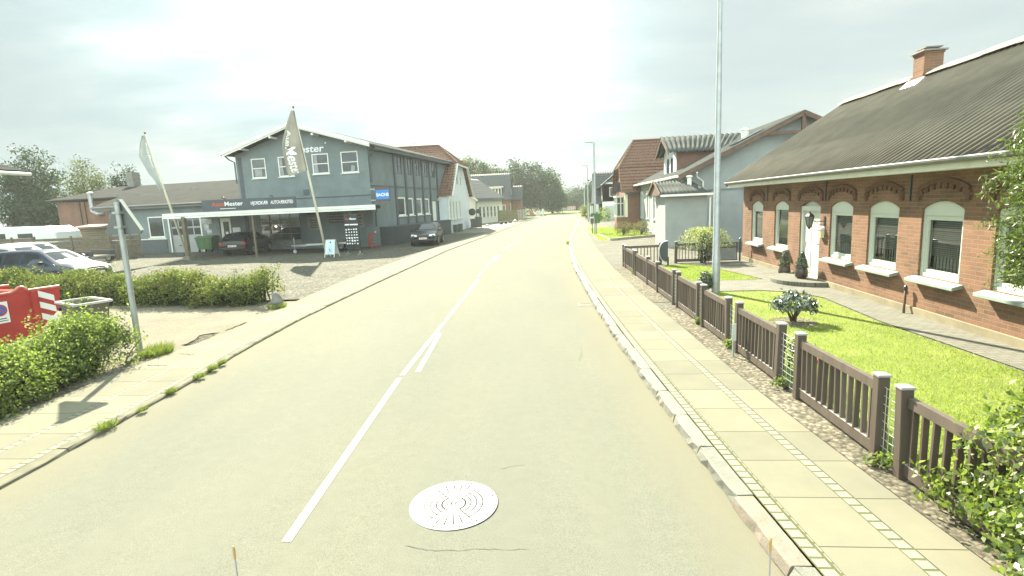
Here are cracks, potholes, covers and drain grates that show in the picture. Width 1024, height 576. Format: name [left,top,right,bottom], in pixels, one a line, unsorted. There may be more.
manhole cover [409,481,498,531]
pothole [183,332,220,346]
